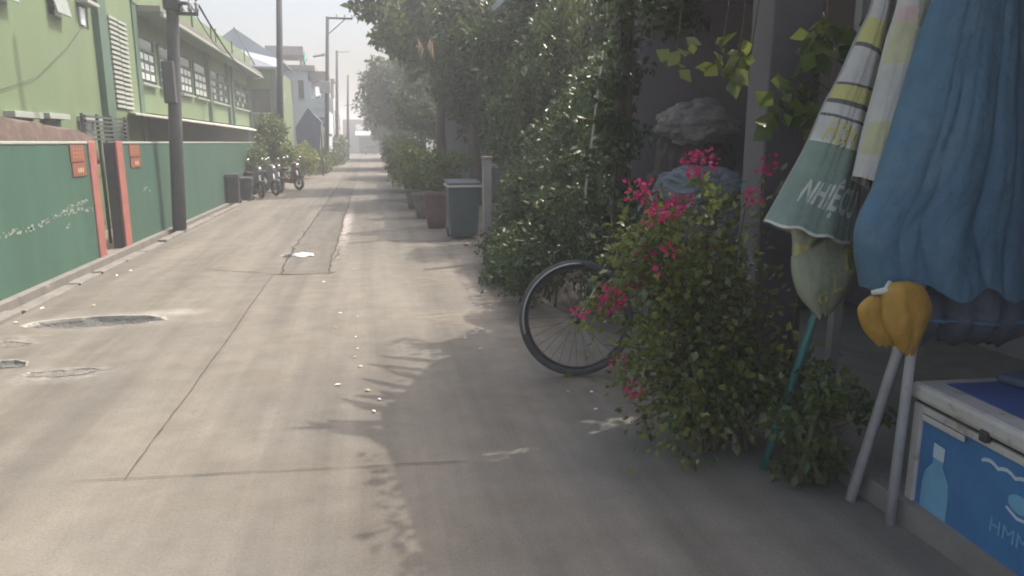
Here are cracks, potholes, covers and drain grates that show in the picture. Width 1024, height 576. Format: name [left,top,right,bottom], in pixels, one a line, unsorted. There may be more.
crack [280,163,458,274]
pothole [20,368,107,377]
pothole [0,359,29,369]
pothole [20,314,168,328]
